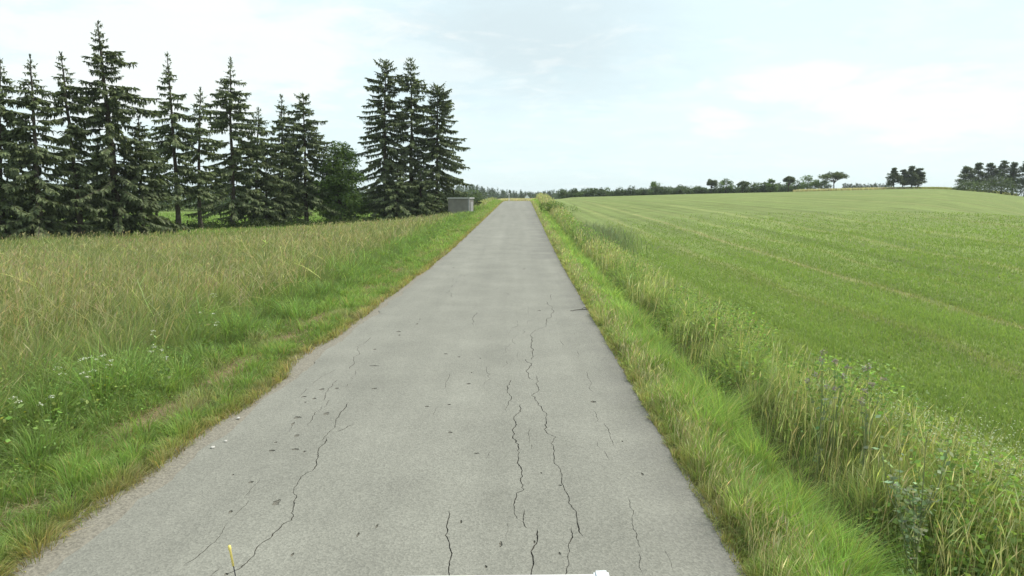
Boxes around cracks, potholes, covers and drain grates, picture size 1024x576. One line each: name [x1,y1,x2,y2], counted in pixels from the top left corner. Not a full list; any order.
crack [506,296,582,575]
crack [183,339,369,573]
crack [445,513,453,576]
